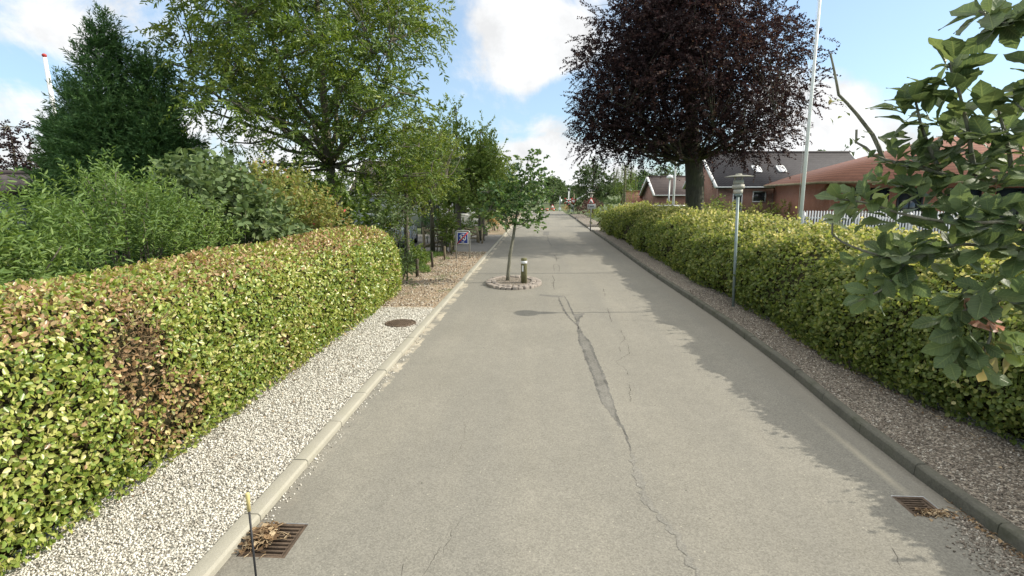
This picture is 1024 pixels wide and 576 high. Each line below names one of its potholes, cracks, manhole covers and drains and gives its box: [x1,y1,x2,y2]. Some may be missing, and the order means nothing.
drain grate [892,496,946,517]
drain grate [237,523,308,558]
manhole cover [385,319,416,328]
